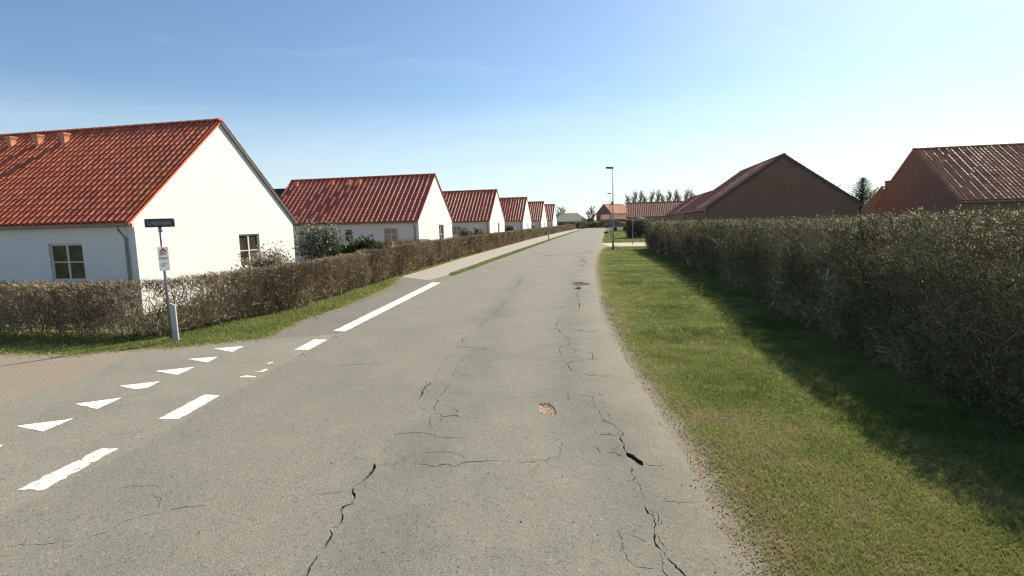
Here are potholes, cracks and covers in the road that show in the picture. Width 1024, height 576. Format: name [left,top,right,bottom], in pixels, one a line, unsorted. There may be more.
crack [2,485,209,548]
crack [306,337,563,576]
crack [567,393,701,576]
crack [554,294,597,376]
pothole [538,403,557,414]
